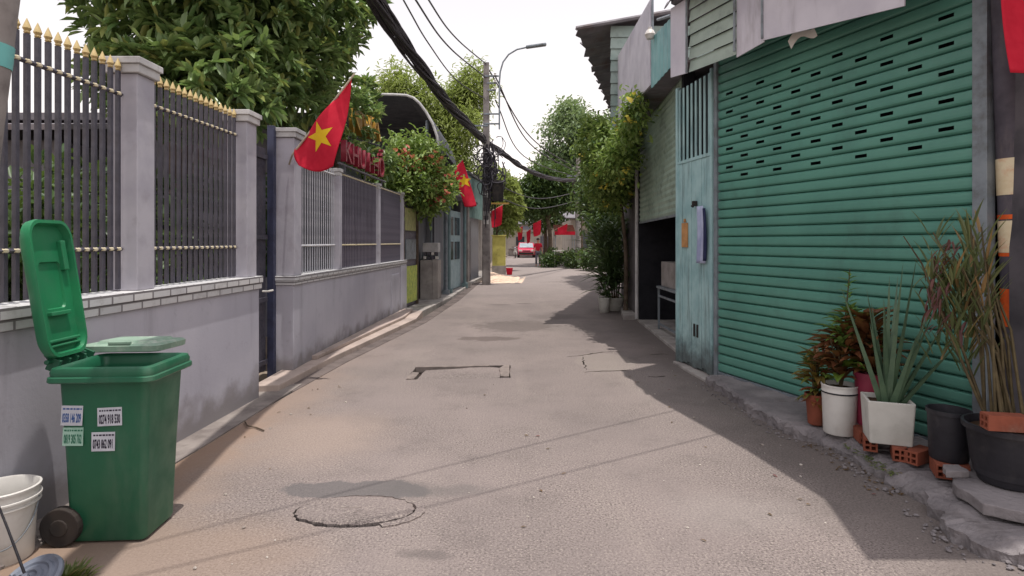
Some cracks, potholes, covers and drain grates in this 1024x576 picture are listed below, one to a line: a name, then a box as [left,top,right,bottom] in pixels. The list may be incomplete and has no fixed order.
crack [568,352,625,372]
manhole cover [293,495,425,528]
